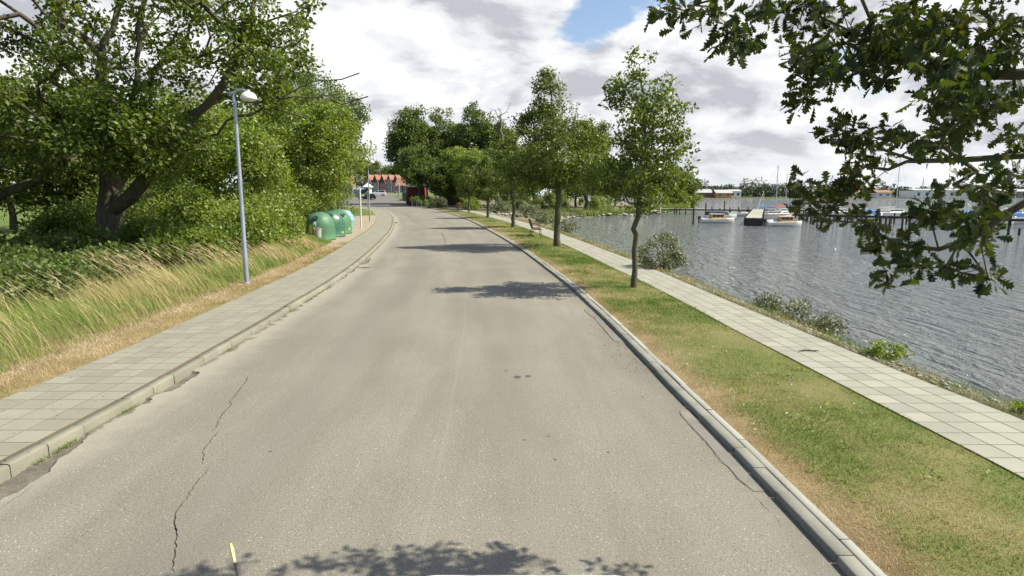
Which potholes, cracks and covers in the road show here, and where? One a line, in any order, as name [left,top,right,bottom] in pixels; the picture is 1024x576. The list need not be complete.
crack [171,376,248,576]
